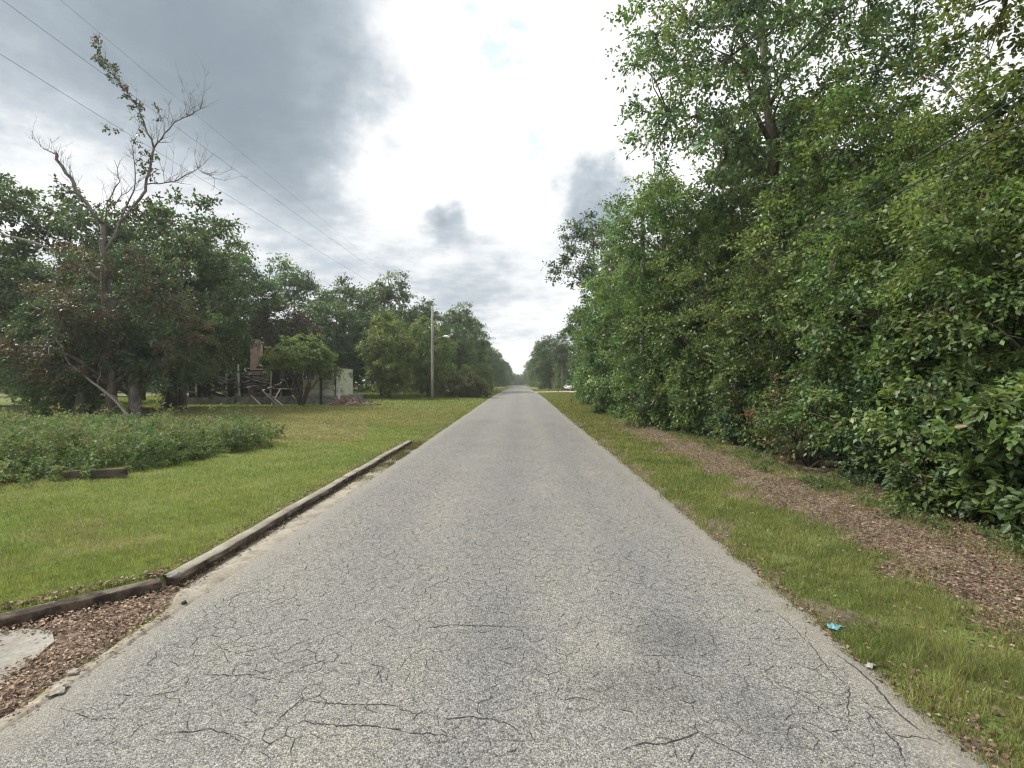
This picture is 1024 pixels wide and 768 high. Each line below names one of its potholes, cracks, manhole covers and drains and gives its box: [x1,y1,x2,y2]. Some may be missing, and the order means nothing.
crack [50,420,614,764]
crack [536,423,940,768]
